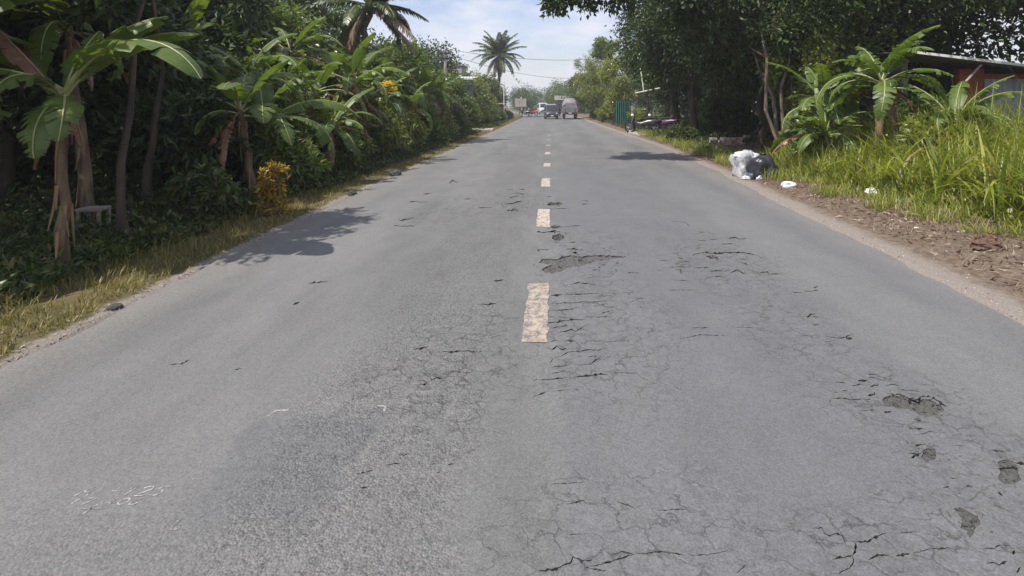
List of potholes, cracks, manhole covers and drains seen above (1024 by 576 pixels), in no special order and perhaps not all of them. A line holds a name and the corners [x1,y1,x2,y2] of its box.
crack [412,346,482,385]
crack [681,319,754,339]
pothole [916,447,956,468]
crack [802,313,853,342]
pothole [875,383,976,427]
crack [818,527,953,574]
crack [357,453,453,489]
crack [658,221,780,281]
crack [834,372,947,421]
crack [985,545,1021,573]
crack [535,196,643,396]
